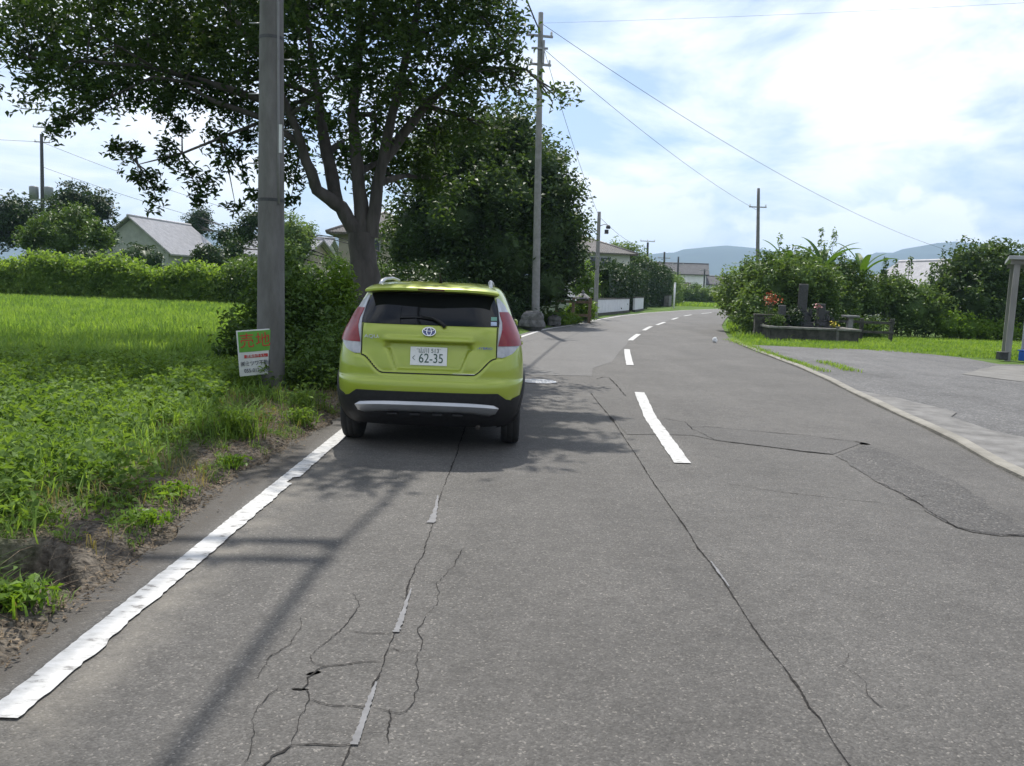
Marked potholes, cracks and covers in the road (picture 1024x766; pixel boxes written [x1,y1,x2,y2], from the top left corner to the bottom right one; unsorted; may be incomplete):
crack [243,428,465,766]
crack [664,418,856,454]
